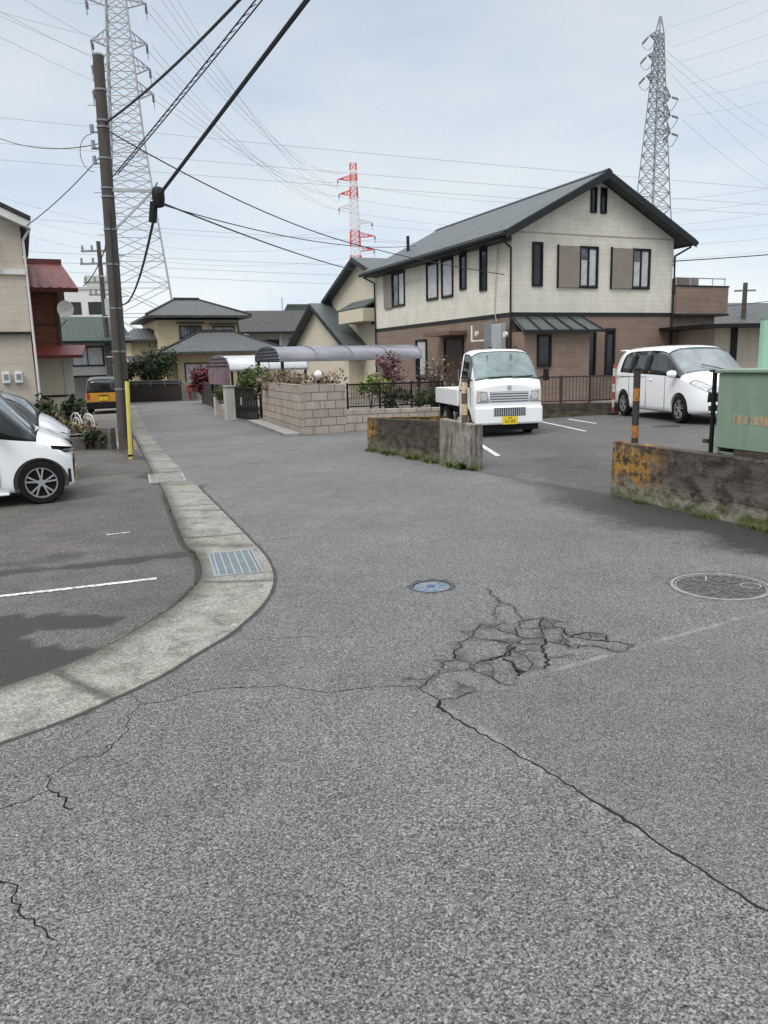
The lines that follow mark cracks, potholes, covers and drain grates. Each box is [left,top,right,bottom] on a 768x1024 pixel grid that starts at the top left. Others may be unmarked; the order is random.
drain grate [207,549,264,577]
manhole cover [670,573,768,600]
crack [194,589,768,912]
crack [0,880,56,940]
manhole cover [410,580,453,592]
crack [0,694,190,810]
